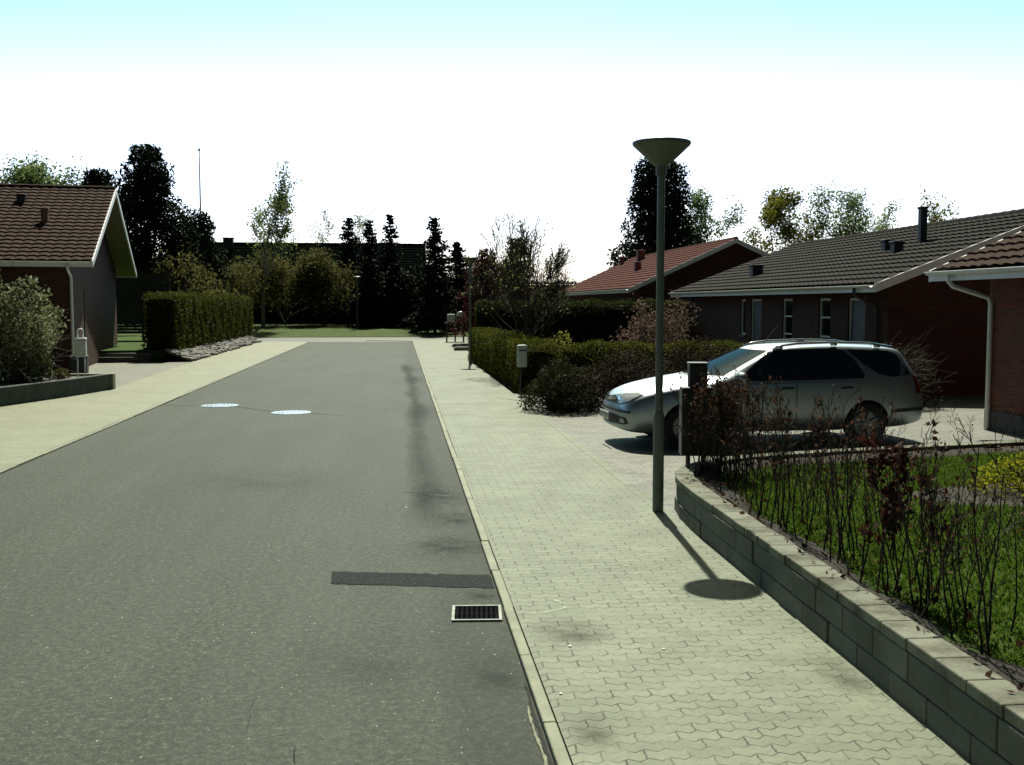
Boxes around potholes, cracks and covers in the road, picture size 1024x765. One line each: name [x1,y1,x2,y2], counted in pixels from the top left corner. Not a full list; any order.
drain grate [451,605,502,622]
